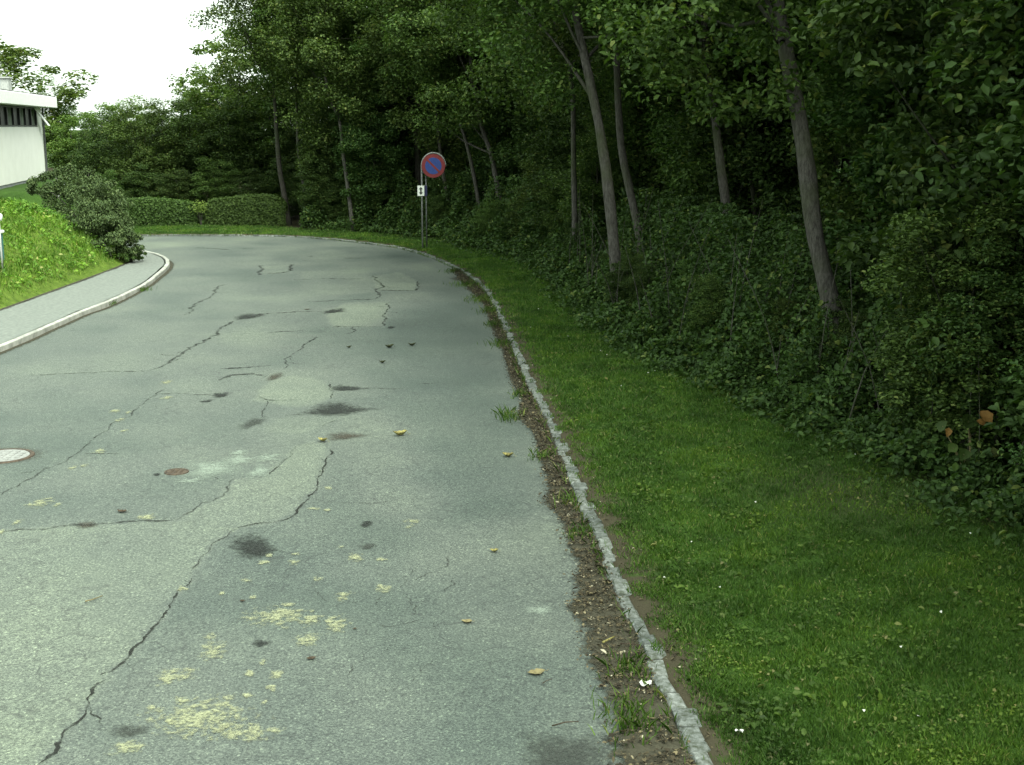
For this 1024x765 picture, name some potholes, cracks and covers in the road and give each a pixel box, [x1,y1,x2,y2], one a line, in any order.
manhole cover [0,448,35,464]
crack [9,520,168,531]
crack [37,451,333,765]
